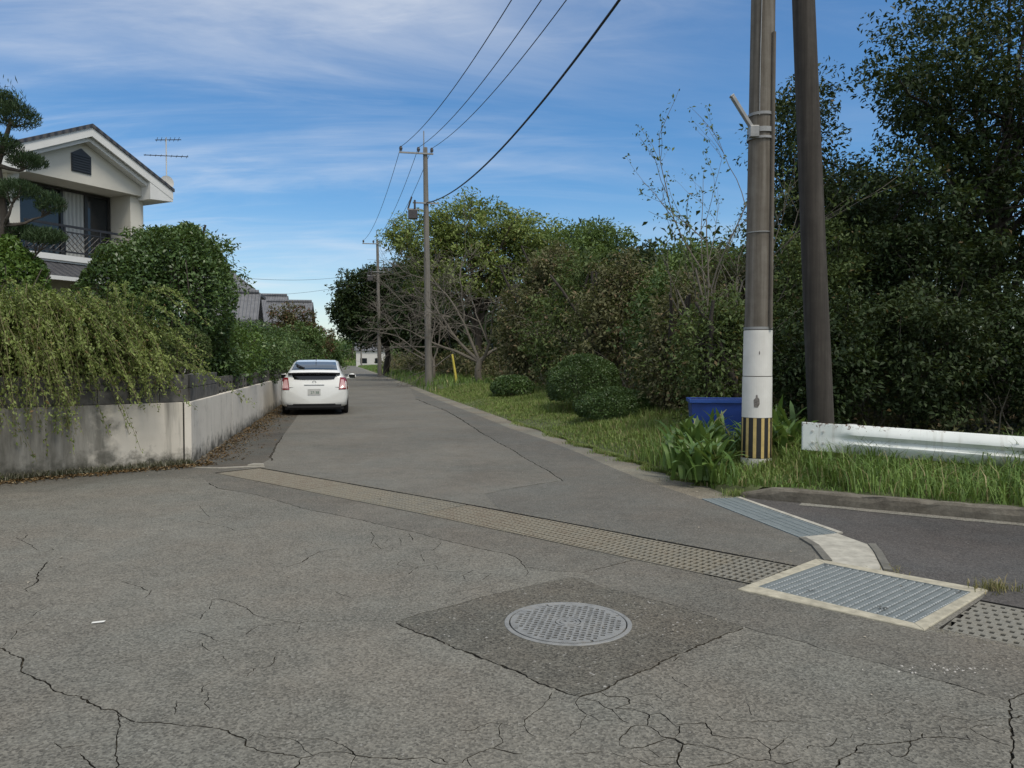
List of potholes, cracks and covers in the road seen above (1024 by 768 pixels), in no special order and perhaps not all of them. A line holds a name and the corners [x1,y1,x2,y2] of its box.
crack [1008,693,1024,768]
drain grate [704,557,795,584]
crack [569,628,1010,768]
drain grate [738,559,988,631]
crack [0,535,552,768]
drain grate [943,601,1024,647]
drain grate [702,497,792,521]
manhole cover [504,602,632,646]
drain grate [497,519,631,550]
drain grate [258,475,347,491]
drain grate [422,505,540,530]
